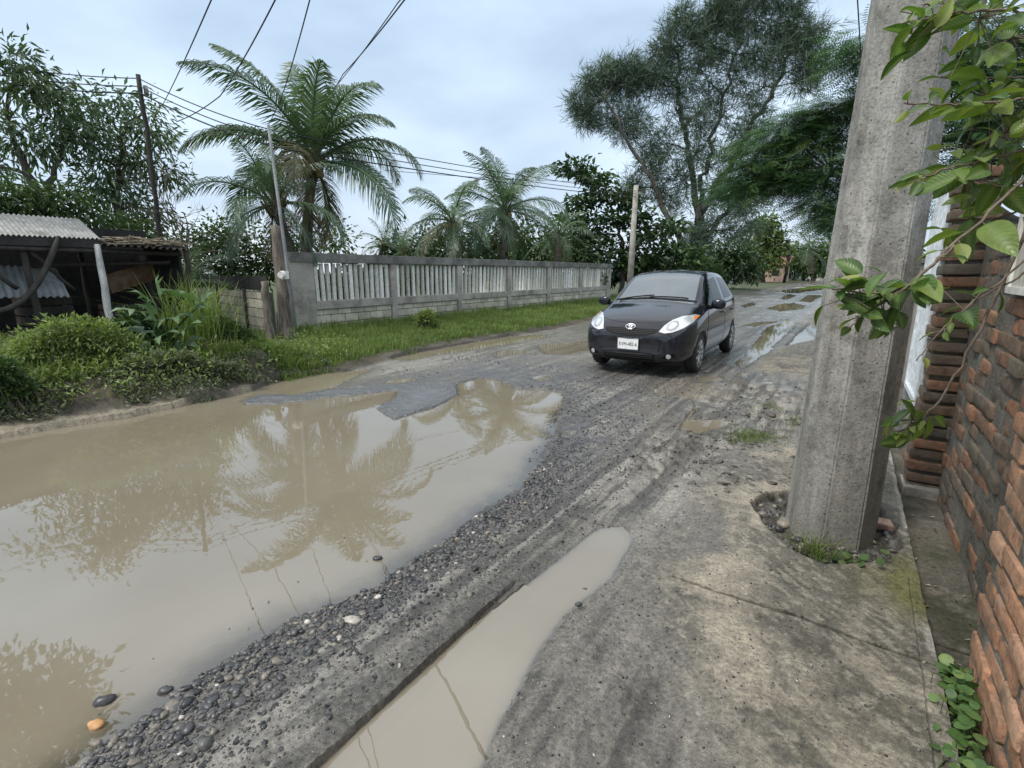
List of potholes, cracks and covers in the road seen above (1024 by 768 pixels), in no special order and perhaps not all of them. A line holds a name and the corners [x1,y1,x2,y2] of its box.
pothole [782,321,818,347]
pothole [533,339,589,355]
pothole [672,402,742,435]
pothole [0,366,570,768]
pothole [386,332,554,361]
pothole [796,295,822,303]
pothole [302,524,638,768]
pothole [765,302,809,312]
pothole [730,317,803,368]
